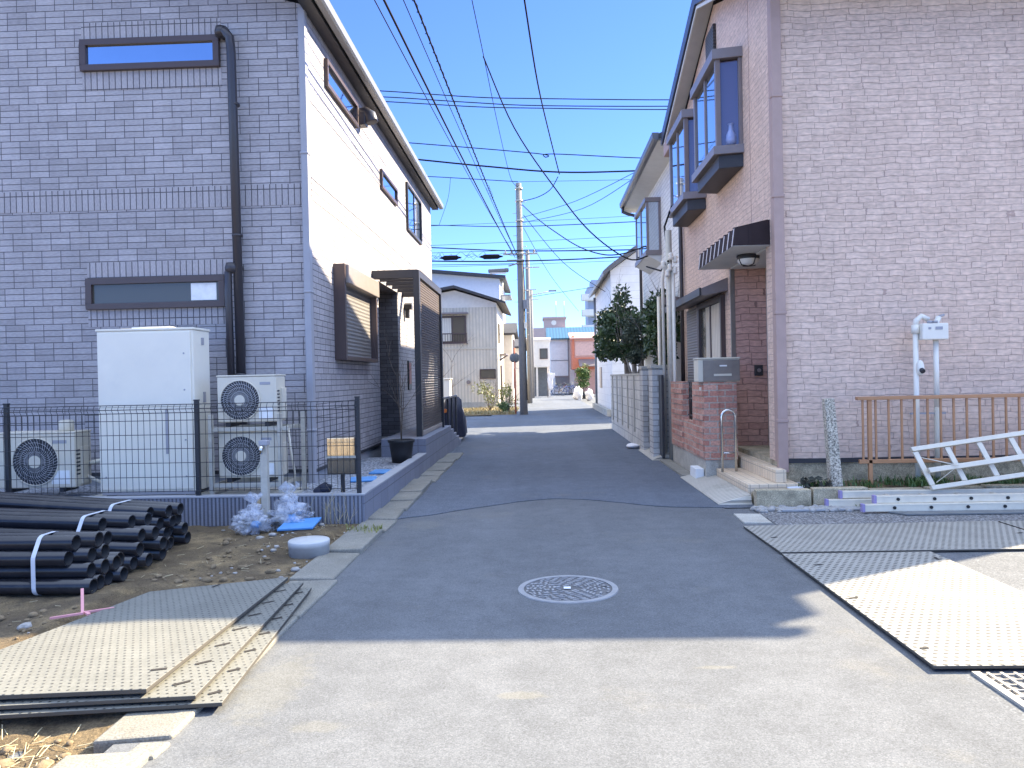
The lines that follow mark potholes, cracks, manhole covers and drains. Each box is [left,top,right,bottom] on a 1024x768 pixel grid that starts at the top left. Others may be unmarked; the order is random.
manhole cover [518,575,619,604]
